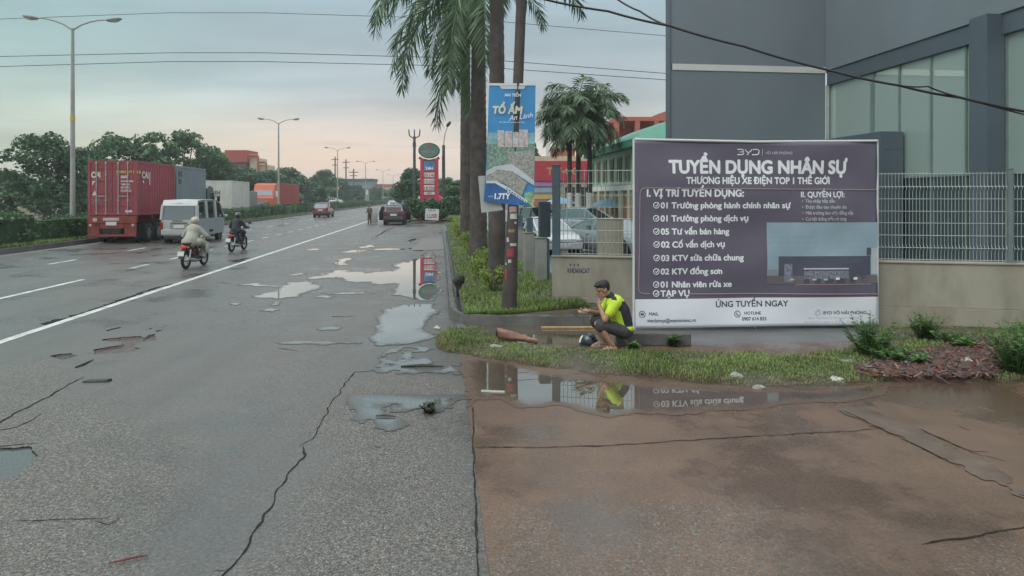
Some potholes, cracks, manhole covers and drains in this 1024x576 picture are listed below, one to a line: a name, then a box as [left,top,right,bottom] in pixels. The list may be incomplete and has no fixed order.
crack [21,516,121,525]
crack [214,370,372,576]
pothole [93,334,156,354]
crack [921,526,1024,545]
